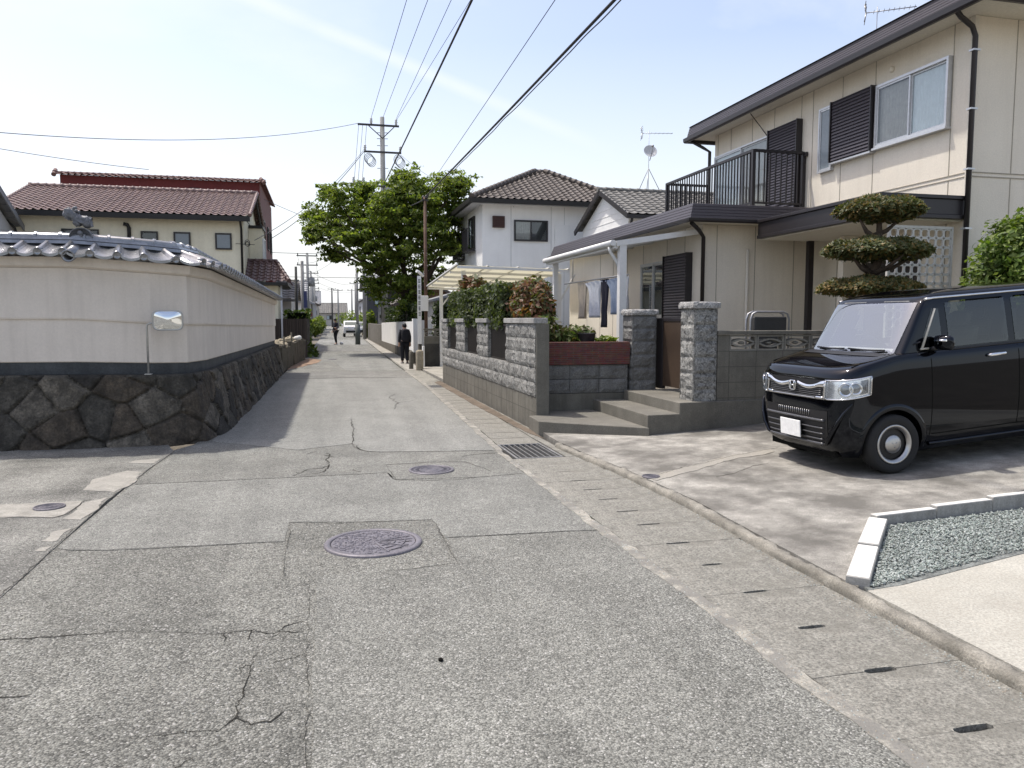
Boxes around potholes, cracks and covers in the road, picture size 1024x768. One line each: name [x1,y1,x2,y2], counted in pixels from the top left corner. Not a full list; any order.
manhole cover [32,503,66,511]
manhole cover [408,465,454,475]
crack [148,652,305,768]
crack [351,418,493,480]
drain grate [498,443,564,459]
manhole cover [324,528,422,559]
